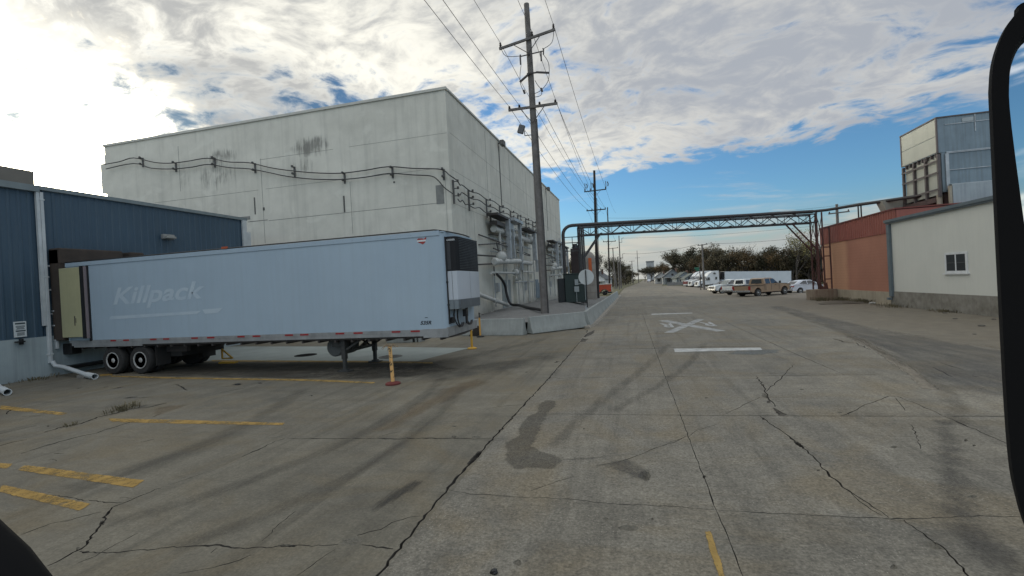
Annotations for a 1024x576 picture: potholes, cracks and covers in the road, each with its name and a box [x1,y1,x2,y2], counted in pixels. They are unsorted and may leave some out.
crack [597,365,969,576]
crack [21,488,338,575]
